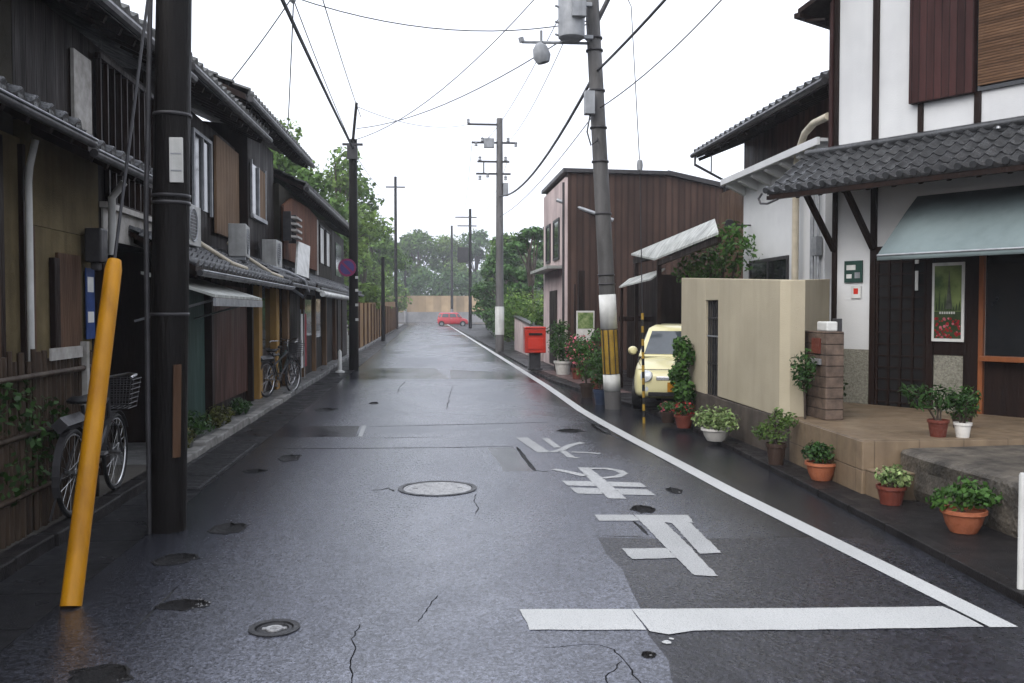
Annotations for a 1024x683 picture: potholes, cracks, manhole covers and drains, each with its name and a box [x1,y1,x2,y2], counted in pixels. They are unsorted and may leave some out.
pothole [154,598,211,611]
pothole [67,664,134,683]
manhole cover [398,481,477,496]
crack [349,625,360,683]
pothole [150,553,200,566]
pothole [630,505,656,513]
crack [546,644,641,683]
pothole [207,522,247,534]
manhole cover [248,619,300,637]
